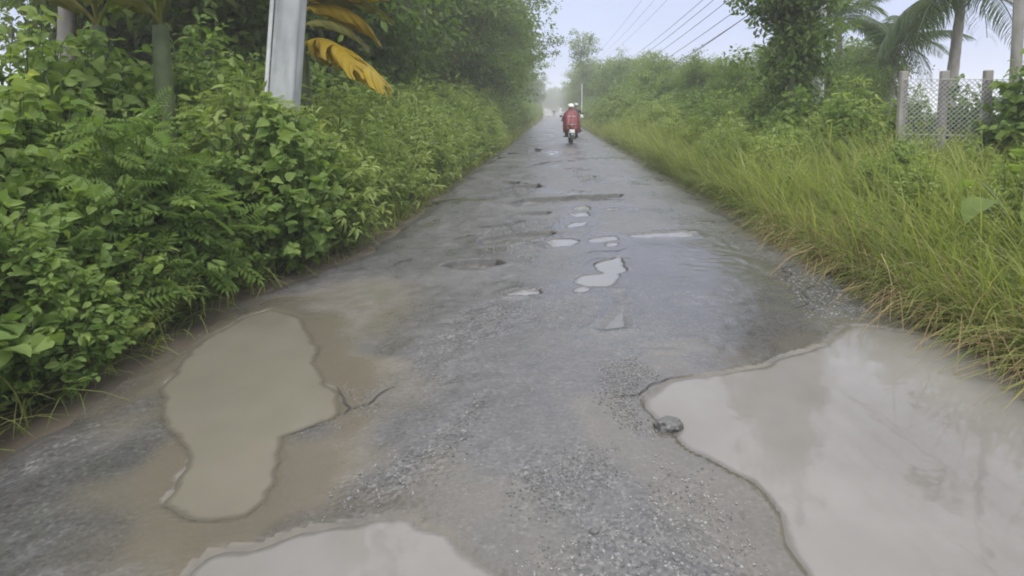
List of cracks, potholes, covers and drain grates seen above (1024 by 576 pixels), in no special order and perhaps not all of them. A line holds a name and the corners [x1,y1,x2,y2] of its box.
pothole [571,256,629,287]
pothole [625,230,698,238]
pothole [506,193,624,206]
pothole [149,307,346,523]
pothole [544,238,583,248]
crack [623,374,692,396]
pothole [179,509,510,576]
pothole [439,258,507,270]
crack [337,385,395,413]
pothole [637,324,1024,576]
